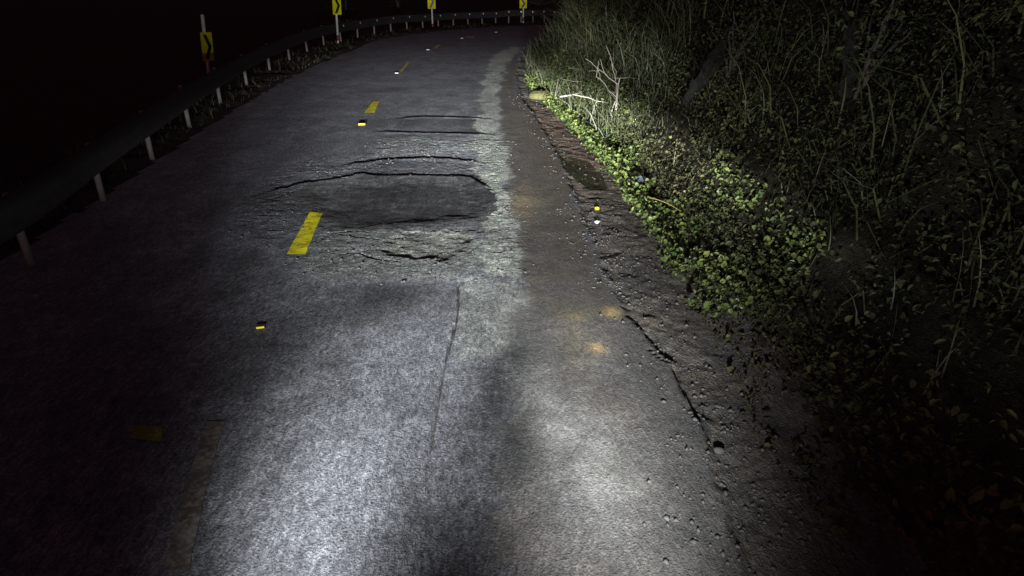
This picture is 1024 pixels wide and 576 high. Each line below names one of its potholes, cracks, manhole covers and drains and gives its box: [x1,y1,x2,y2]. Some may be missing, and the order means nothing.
crack [284,156,484,188]
pothole [292,173,498,232]
